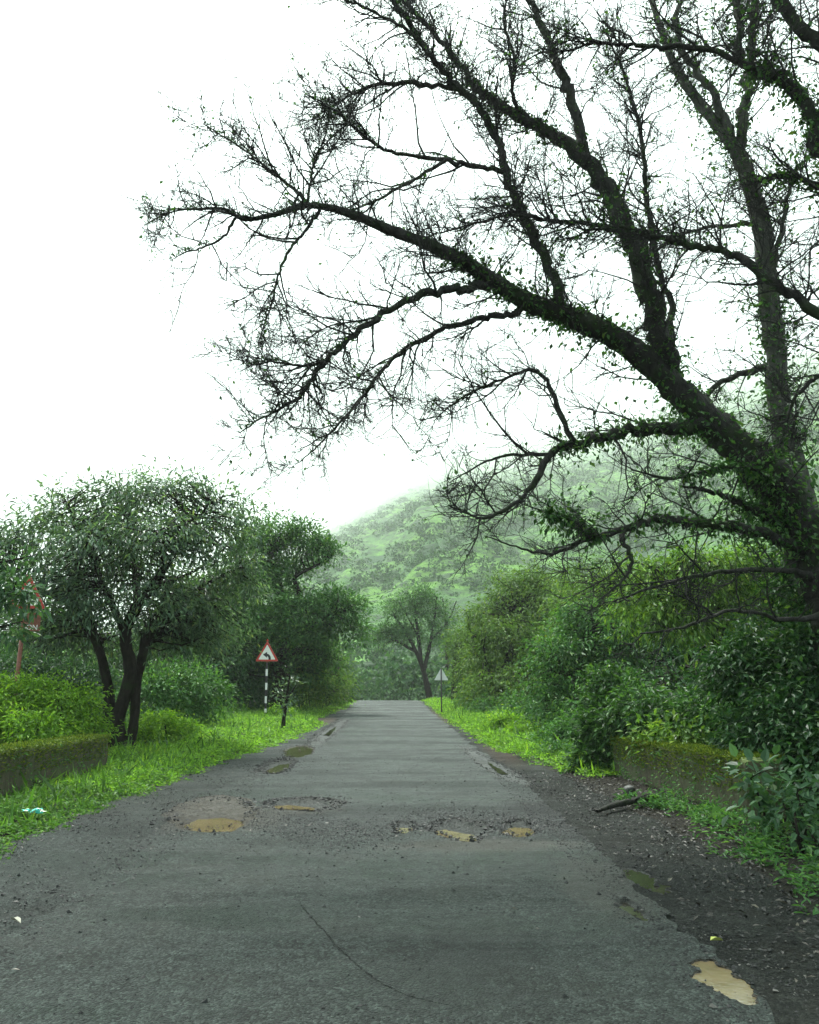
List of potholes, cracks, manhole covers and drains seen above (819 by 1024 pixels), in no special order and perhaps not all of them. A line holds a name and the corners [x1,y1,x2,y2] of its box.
crack [301,905,464,1006]
pothole [380,818,430,834]
pothole [689,955,779,1012]
pothole [246,794,360,814]
pothole [491,815,547,841]
pothole [298,718,350,752]
pothole [281,744,315,758]
pothole [251,755,306,776]
pothole [410,813,508,846]
pothole [146,793,275,841]
